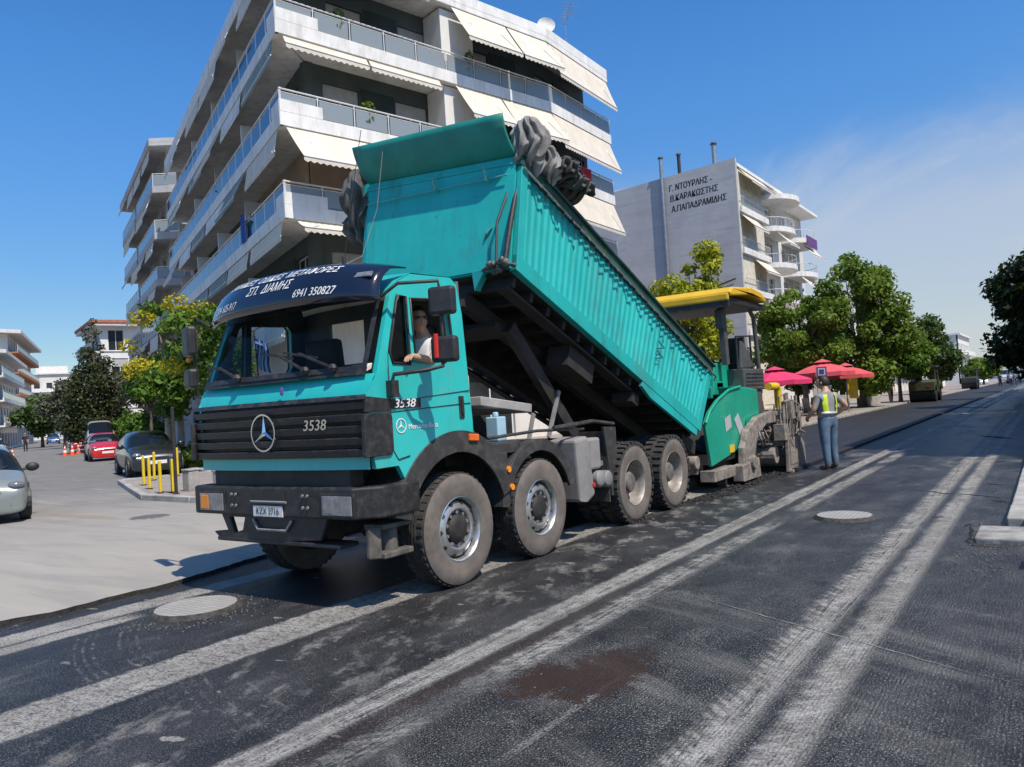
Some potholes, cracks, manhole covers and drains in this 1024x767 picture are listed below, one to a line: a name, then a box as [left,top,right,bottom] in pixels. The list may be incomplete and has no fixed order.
manhole cover [148,595,244,622]
manhole cover [813,511,877,523]
